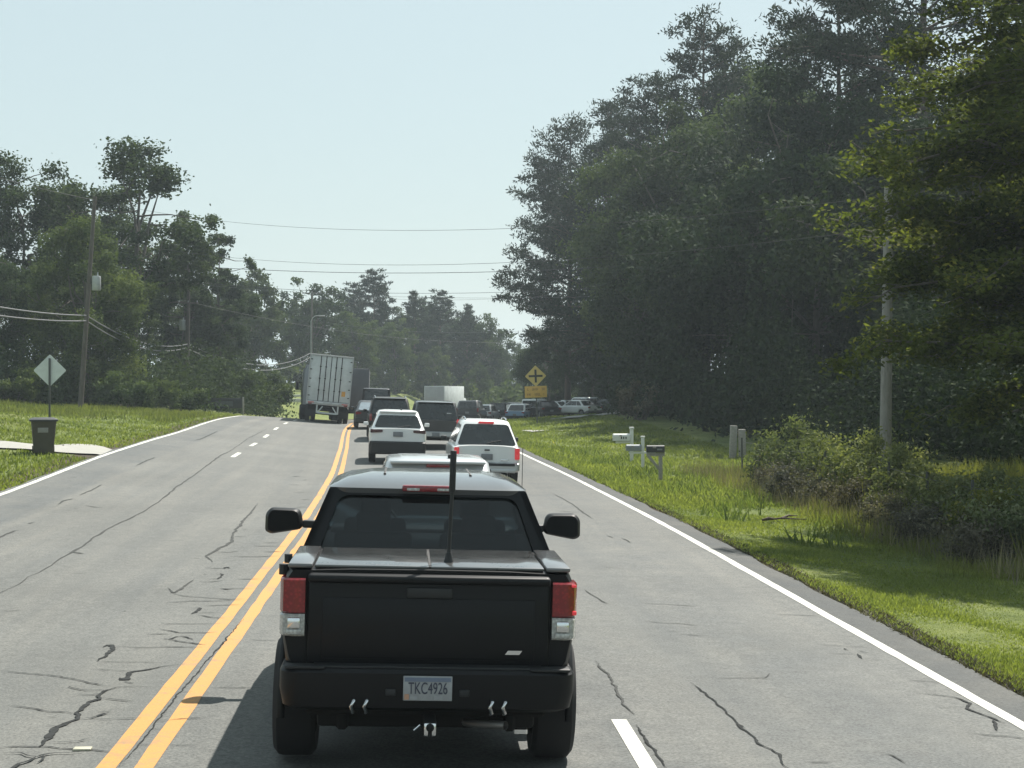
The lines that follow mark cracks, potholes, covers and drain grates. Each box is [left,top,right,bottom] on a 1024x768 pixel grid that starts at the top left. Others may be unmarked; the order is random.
crack [913,680,1021,738]
crack [3,505,282,768]
crack [690,668,788,768]
crack [597,662,667,768]
